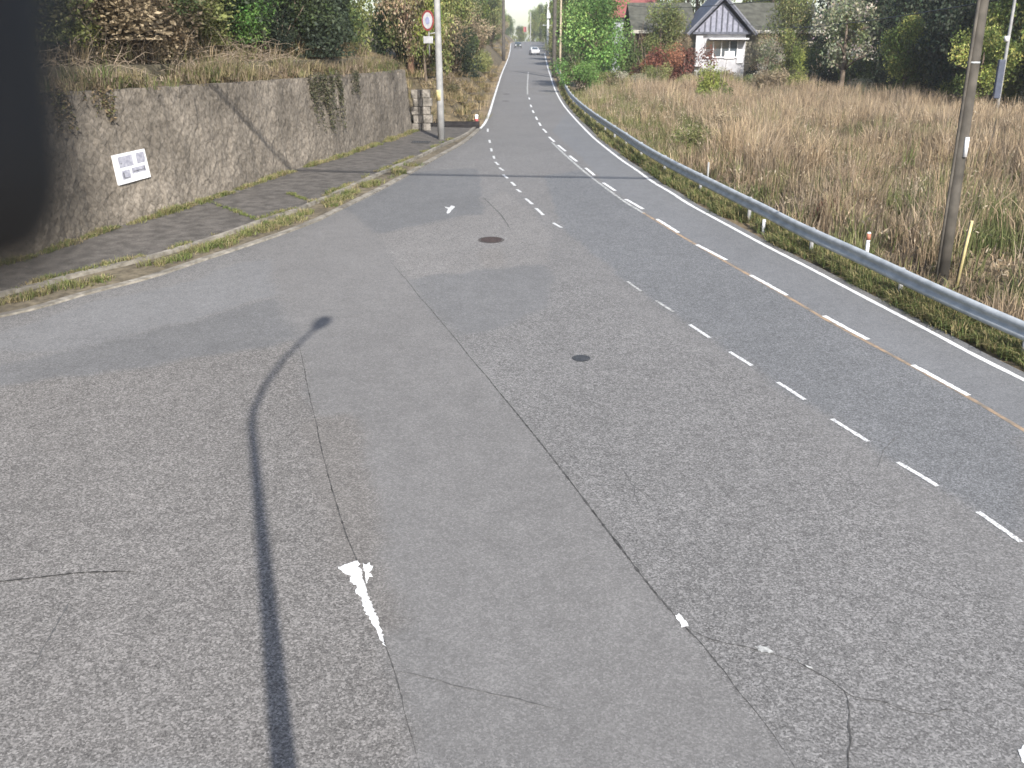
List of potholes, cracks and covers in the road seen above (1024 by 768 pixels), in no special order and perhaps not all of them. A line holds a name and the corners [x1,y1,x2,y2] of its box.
crack [391,262,958,768]
crack [298,344,551,768]
crack [31,601,70,669]
crack [0,570,135,582]
